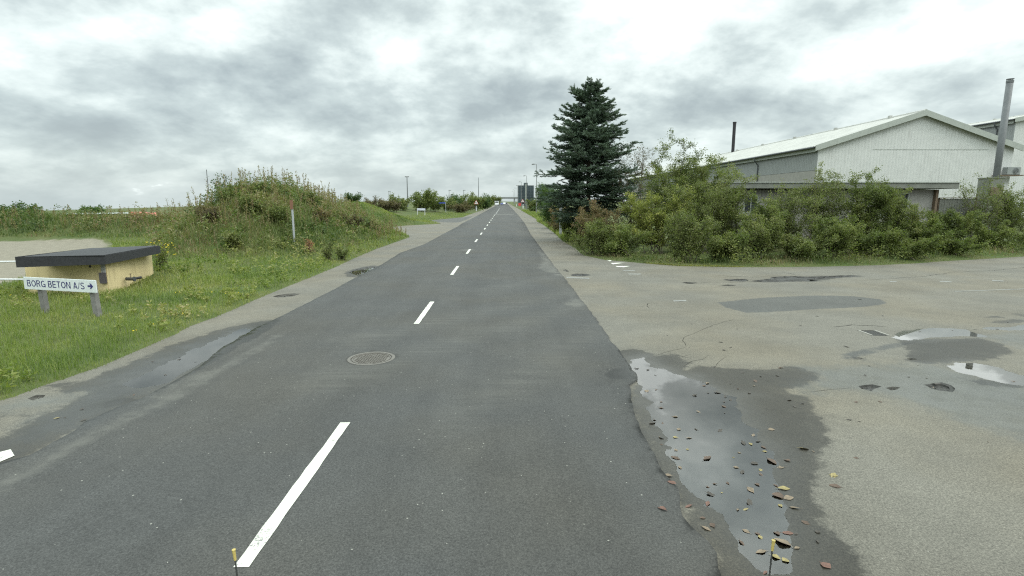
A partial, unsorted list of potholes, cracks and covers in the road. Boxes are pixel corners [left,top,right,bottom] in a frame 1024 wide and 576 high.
manhole cover [347,352,395,365]
pothole [925,382,955,392]
